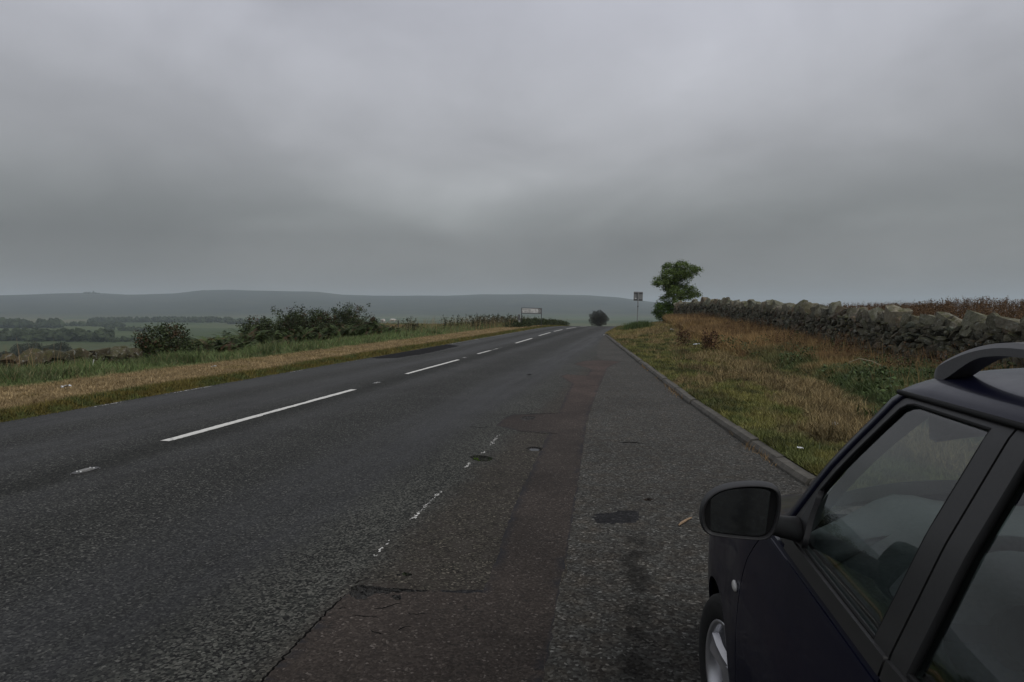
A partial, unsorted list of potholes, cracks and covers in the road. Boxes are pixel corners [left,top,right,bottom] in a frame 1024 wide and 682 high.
pothole [349,585,435,599]
crack [260,579,424,682]
